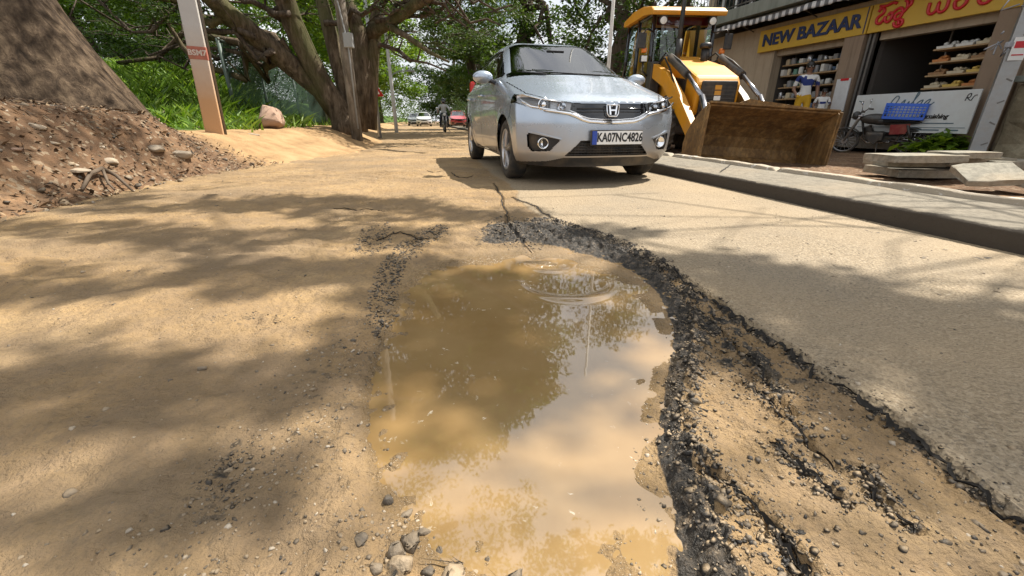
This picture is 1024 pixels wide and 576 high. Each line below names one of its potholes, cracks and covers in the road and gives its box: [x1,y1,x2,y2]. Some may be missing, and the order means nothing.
crack [493,183,554,253]
crack [658,257,1024,576]
crack [376,231,437,241]
pothole [336,217,778,576]
